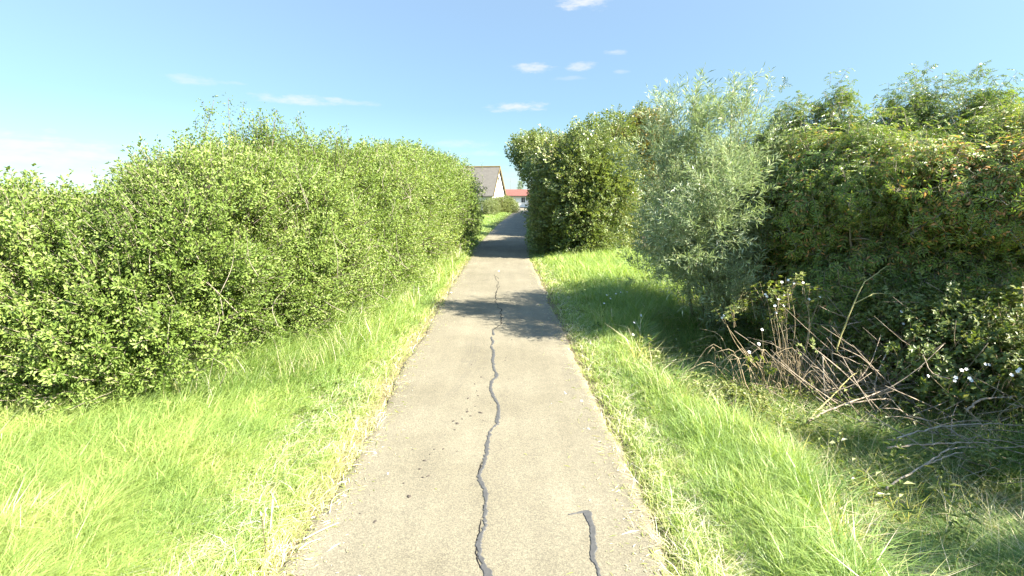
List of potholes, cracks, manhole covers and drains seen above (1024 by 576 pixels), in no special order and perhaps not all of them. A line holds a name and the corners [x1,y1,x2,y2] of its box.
crack [475,276,503,576]
